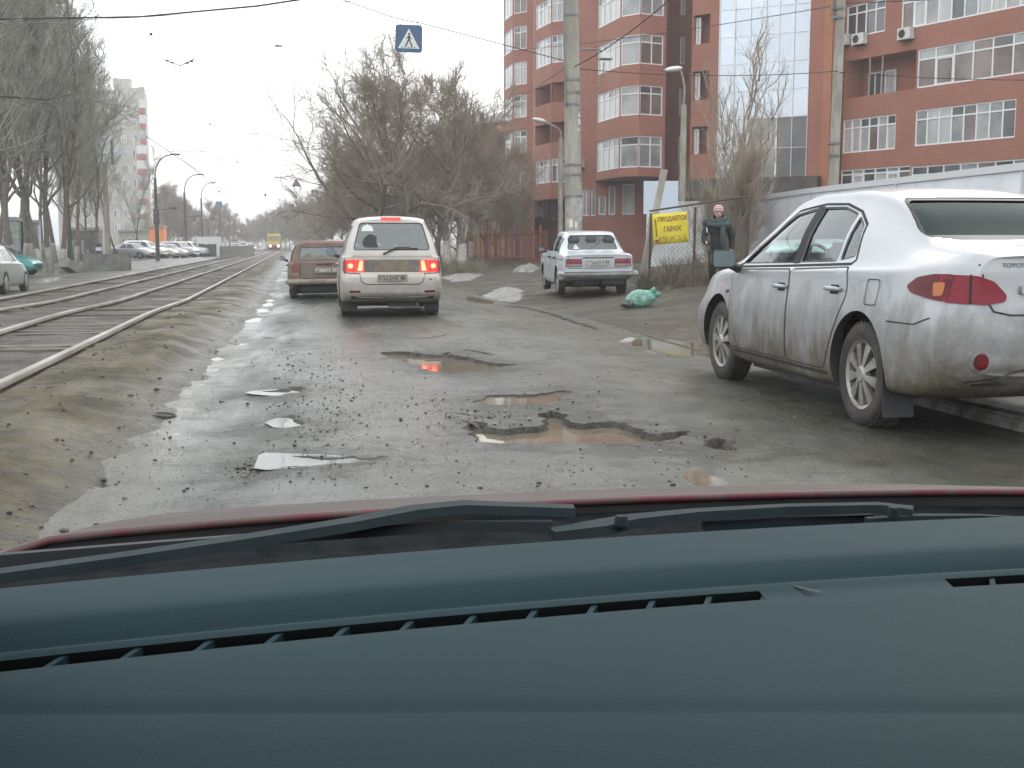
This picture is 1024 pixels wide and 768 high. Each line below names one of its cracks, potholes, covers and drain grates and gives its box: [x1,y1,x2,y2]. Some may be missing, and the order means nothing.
pothole [472,390,573,405]
pothole [245,386,309,396]
pothole [462,411,691,444]
pothole [254,453,393,471]
pothole [703,436,737,451]
pothole [380,351,516,372]
pothole [265,415,305,428]
